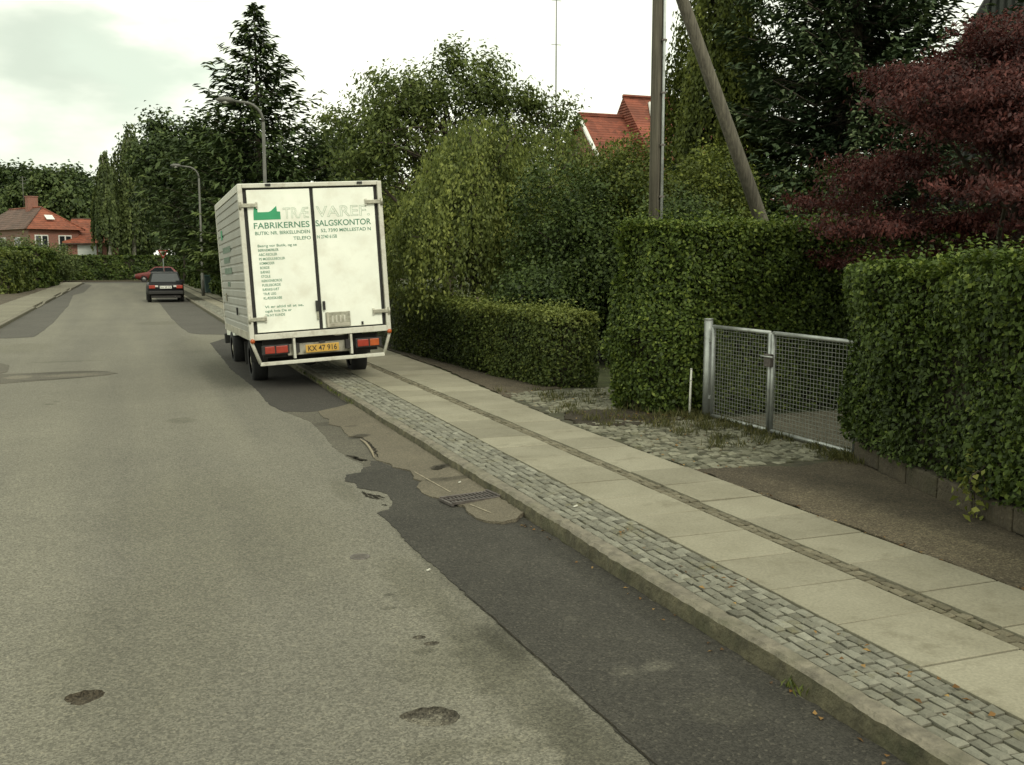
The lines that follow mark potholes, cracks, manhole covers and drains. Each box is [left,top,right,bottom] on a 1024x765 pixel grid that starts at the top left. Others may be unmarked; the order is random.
crack [347,439,378,461]
pothole [64,690,105,705]
drain grate [439,489,501,506]
pothole [399,706,460,727]
